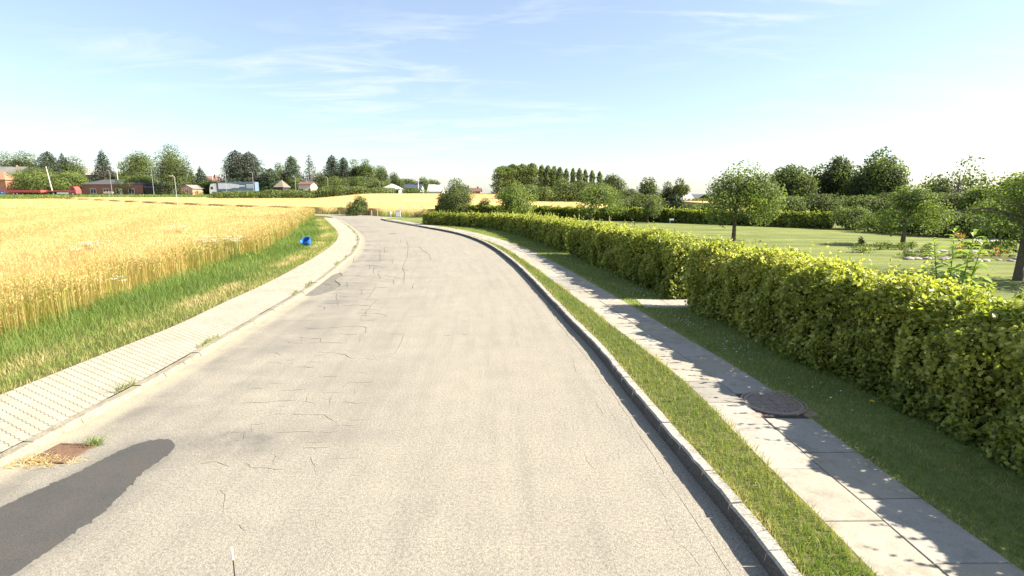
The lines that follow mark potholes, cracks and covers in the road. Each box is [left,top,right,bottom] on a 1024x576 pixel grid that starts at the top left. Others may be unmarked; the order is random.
crack [238,240,431,470]
manhole cover [734,390,821,418]
drain grate [25,443,96,464]
